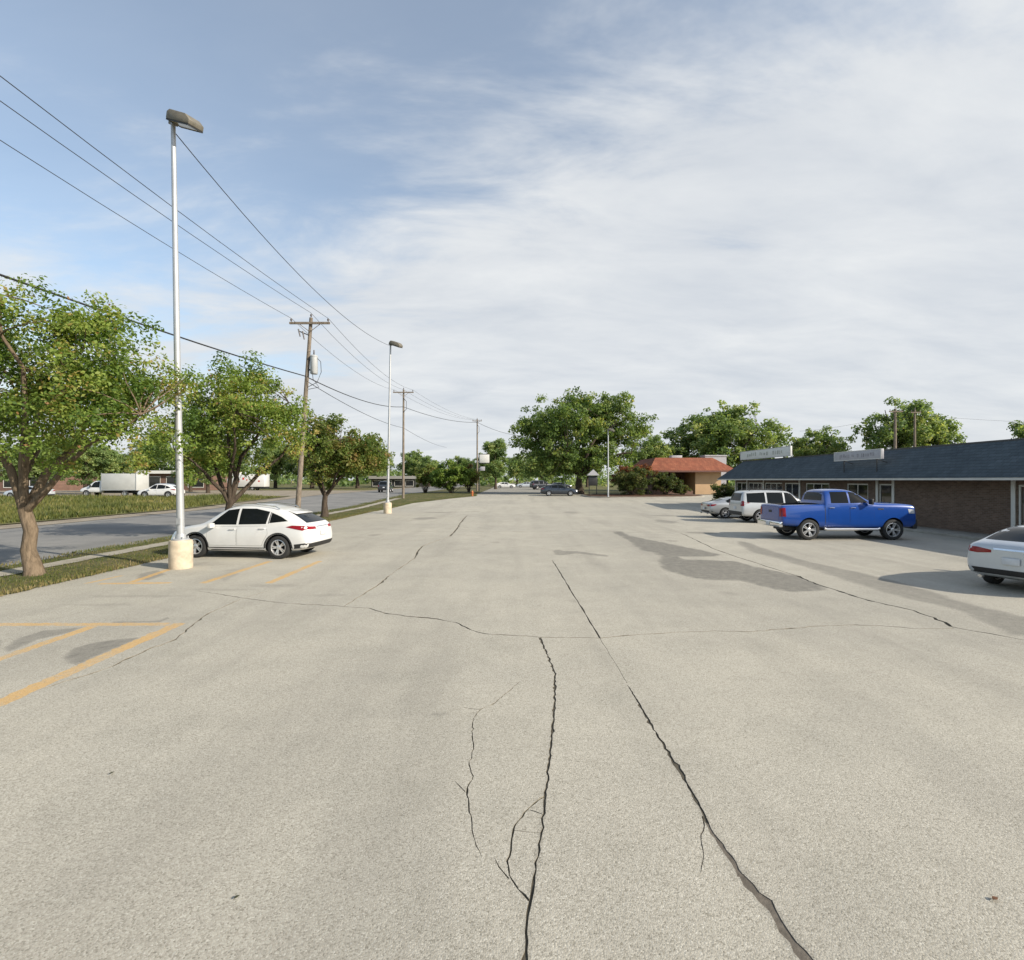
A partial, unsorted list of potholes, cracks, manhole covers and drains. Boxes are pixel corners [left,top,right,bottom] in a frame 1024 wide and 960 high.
crack [208,533,1022,960]
